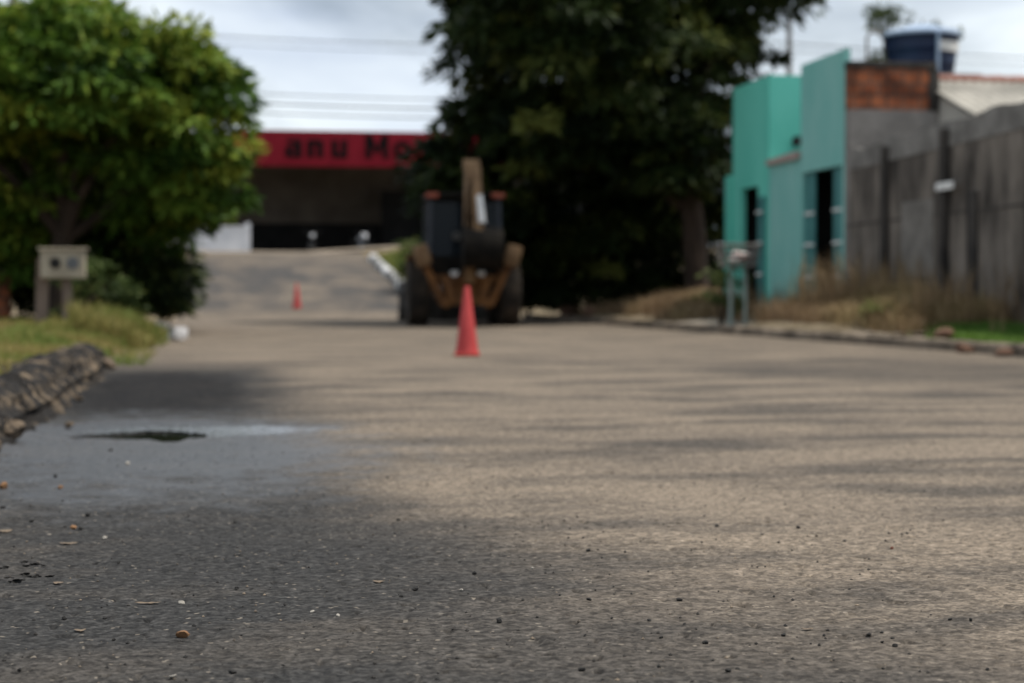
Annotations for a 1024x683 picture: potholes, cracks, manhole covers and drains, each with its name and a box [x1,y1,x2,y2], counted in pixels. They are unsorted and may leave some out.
pothole [69,431,207,442]
